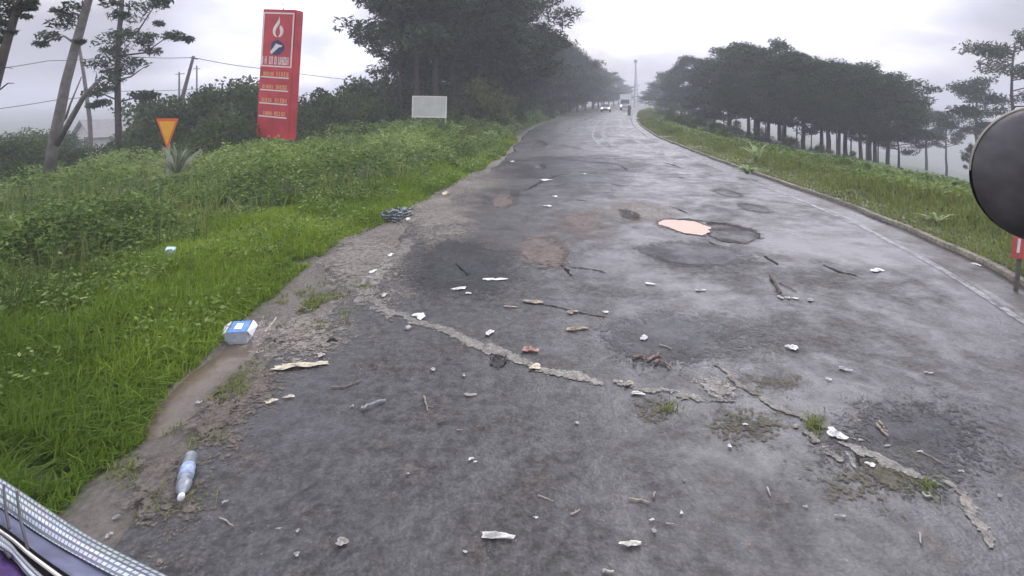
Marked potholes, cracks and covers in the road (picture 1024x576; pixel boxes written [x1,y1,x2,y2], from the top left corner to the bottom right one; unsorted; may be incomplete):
crack [558,263,603,275]
pothole [706,221,765,244]
pothole [710,188,742,198]
pothole [615,208,643,222]
crack [364,297,996,548]
pothole [733,202,778,214]
